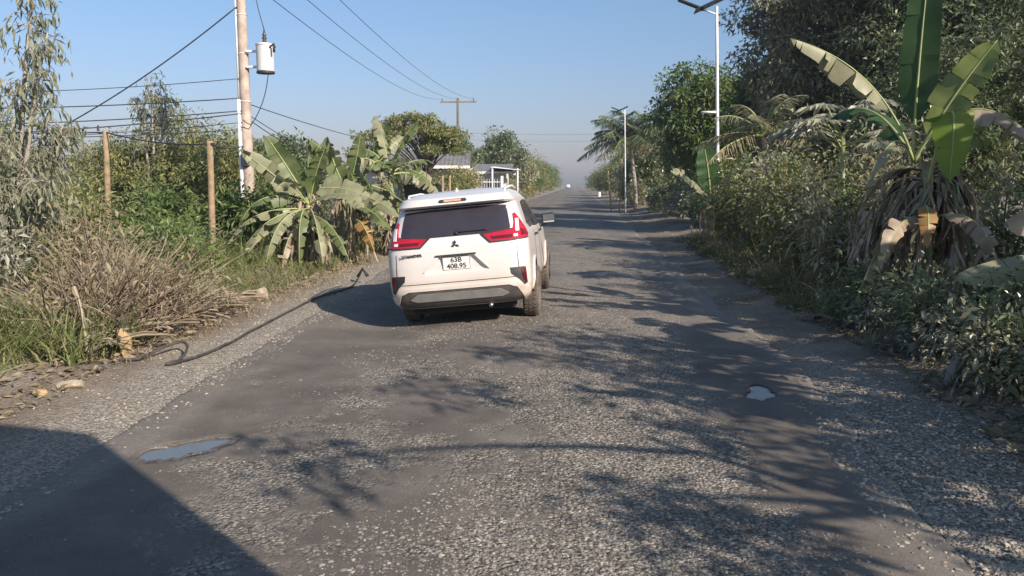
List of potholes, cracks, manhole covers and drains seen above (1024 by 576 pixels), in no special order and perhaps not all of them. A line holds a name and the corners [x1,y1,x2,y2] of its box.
pothole [738,382,783,402]
pothole [128,436,241,463]
